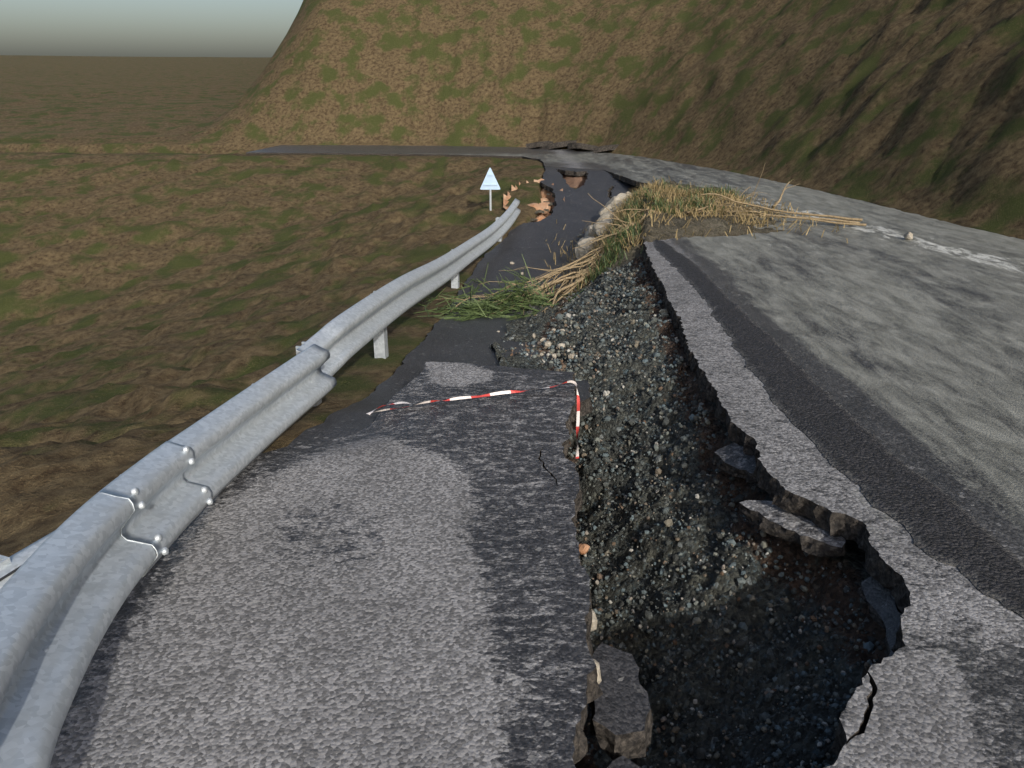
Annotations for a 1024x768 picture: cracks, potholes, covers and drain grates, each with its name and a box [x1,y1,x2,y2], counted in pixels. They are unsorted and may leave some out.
pothole [503,178,565,212]
crack [847,668,877,743]
pothole [490,256,903,768]
pothole [562,174,587,188]
